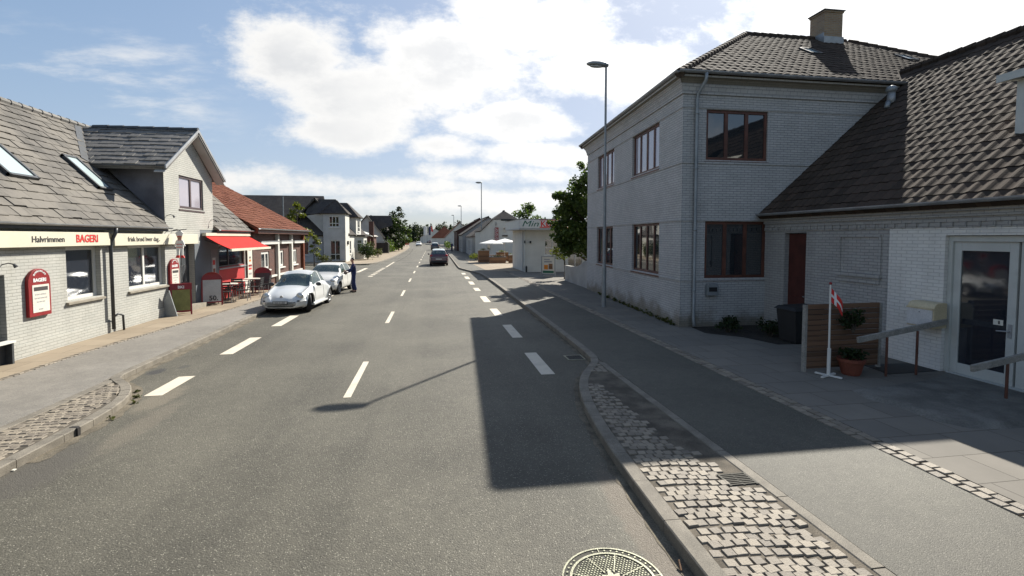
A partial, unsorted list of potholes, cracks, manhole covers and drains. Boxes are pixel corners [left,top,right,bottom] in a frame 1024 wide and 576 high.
drain grate [717,472,759,487]
manhole cover [562,548,663,576]
